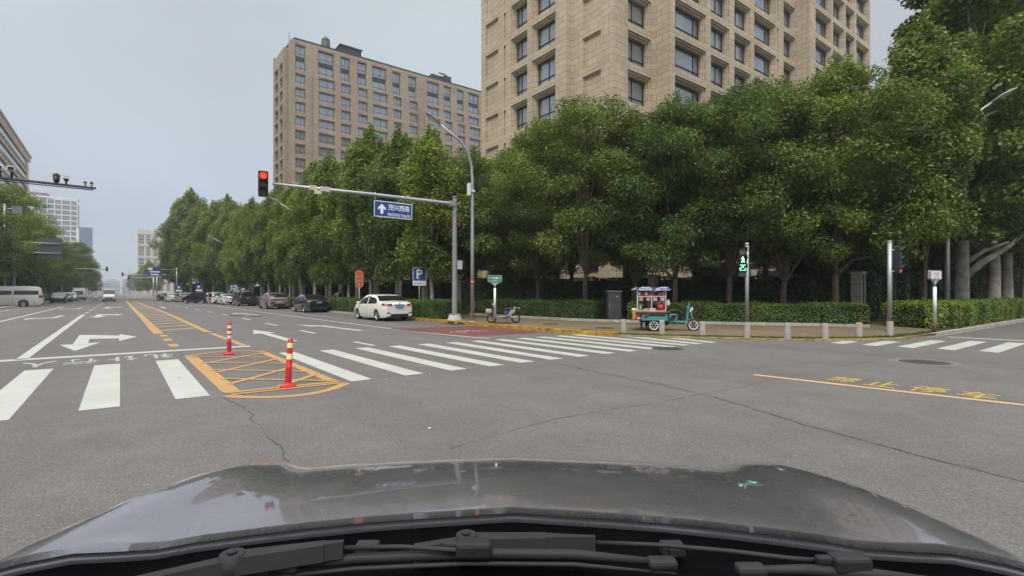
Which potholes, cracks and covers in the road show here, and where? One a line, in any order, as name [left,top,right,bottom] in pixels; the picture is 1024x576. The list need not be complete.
crack [224,398,289,462]
manhole cover [888,358,964,366]
